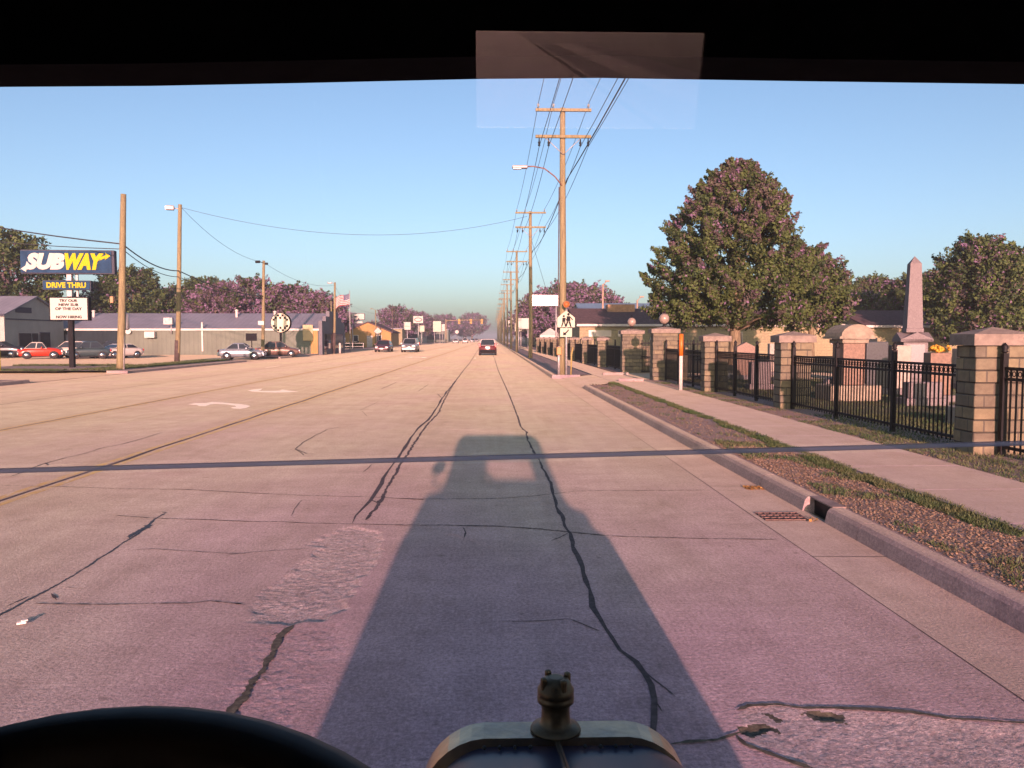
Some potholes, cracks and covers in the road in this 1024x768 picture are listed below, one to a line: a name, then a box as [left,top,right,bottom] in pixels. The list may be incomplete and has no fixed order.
crack [6,348,1024,768]
drain grate [755,496,846,521]
